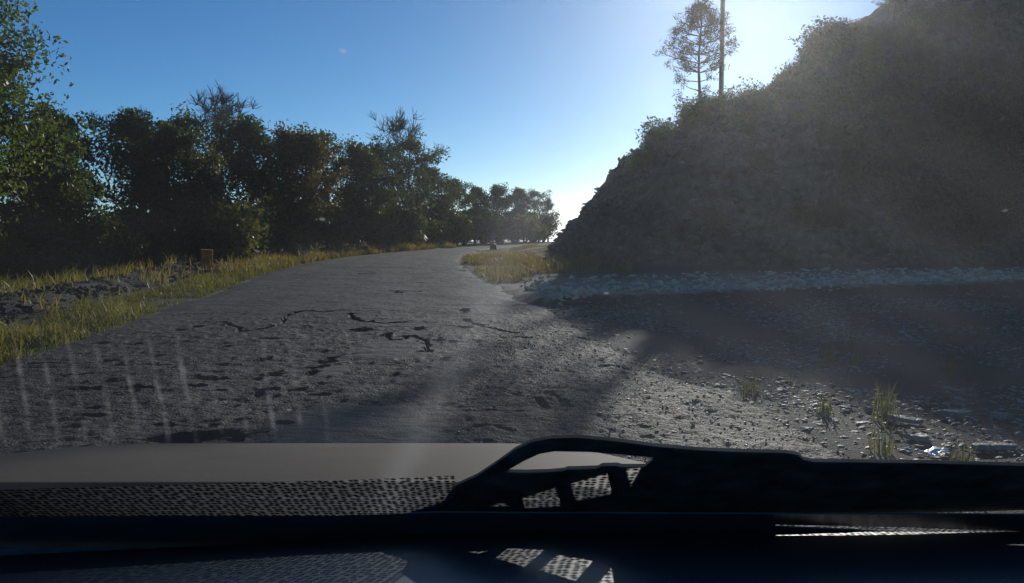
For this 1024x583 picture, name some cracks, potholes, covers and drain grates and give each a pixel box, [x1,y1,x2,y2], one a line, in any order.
crack [462,318,533,339]
pothole [135,428,252,443]
crack [204,310,435,365]
